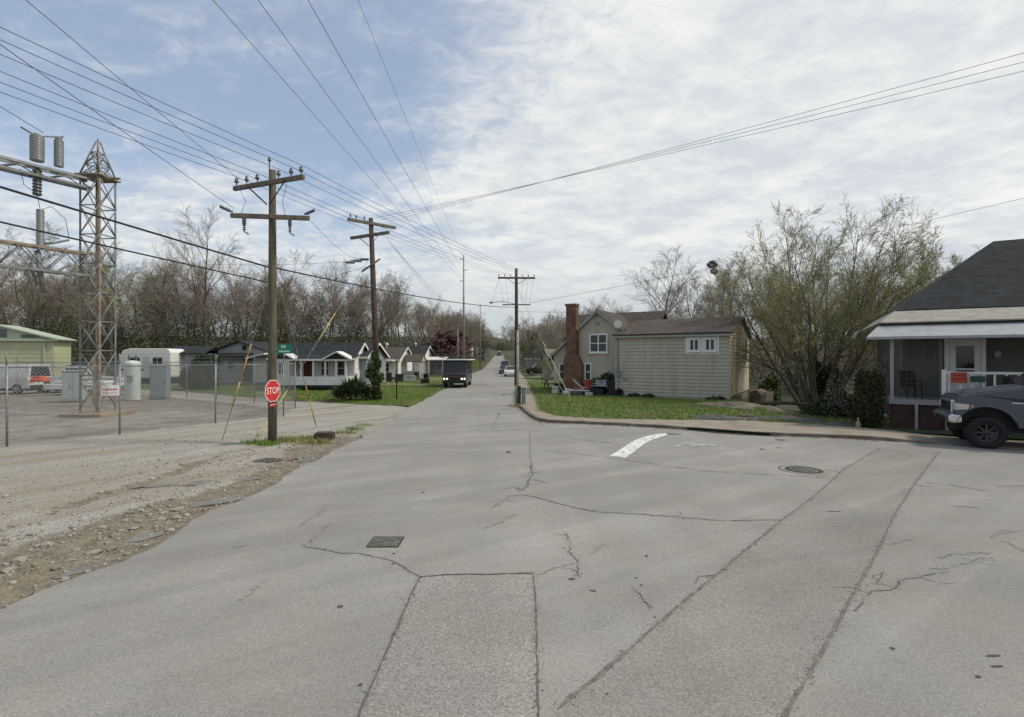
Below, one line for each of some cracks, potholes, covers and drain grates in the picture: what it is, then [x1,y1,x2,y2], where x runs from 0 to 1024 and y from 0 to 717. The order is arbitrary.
crack [542,533,600,576]
manhole cover [778,465,831,475]
crack [837,530,1024,611]
crack [299,507,419,576]
crack [486,416,772,528]
